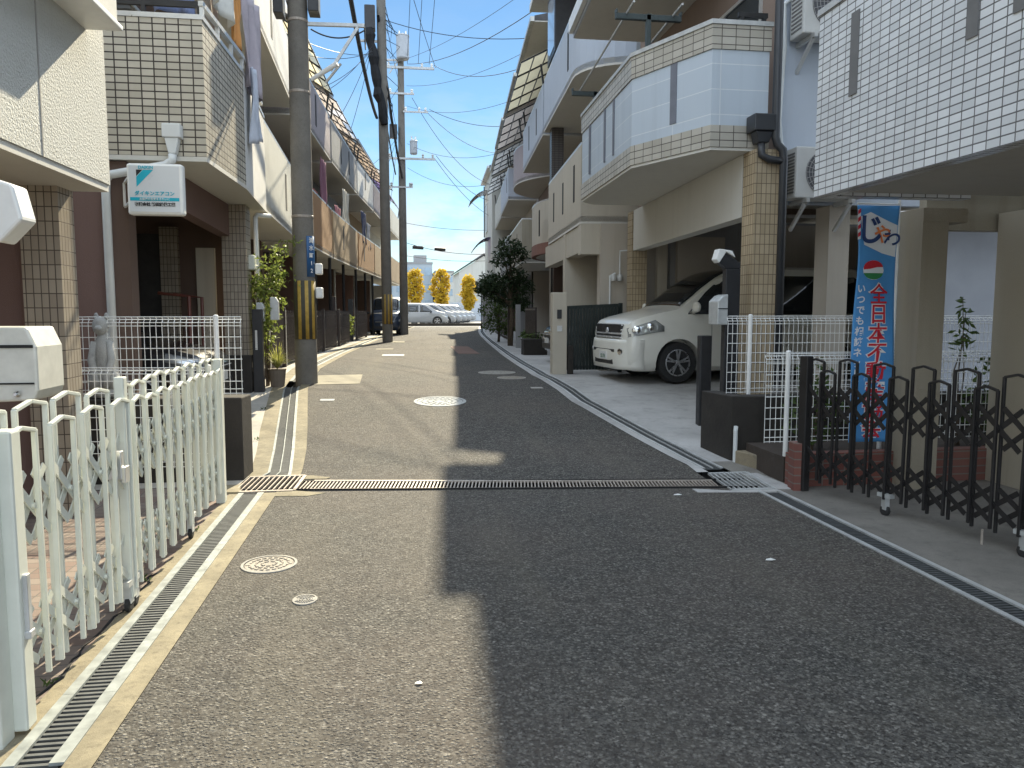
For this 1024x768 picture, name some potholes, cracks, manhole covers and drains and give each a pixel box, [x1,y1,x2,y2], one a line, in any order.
manhole cover [240,555,298,574]
manhole cover [292,594,318,605]
manhole cover [414,396,466,407]
